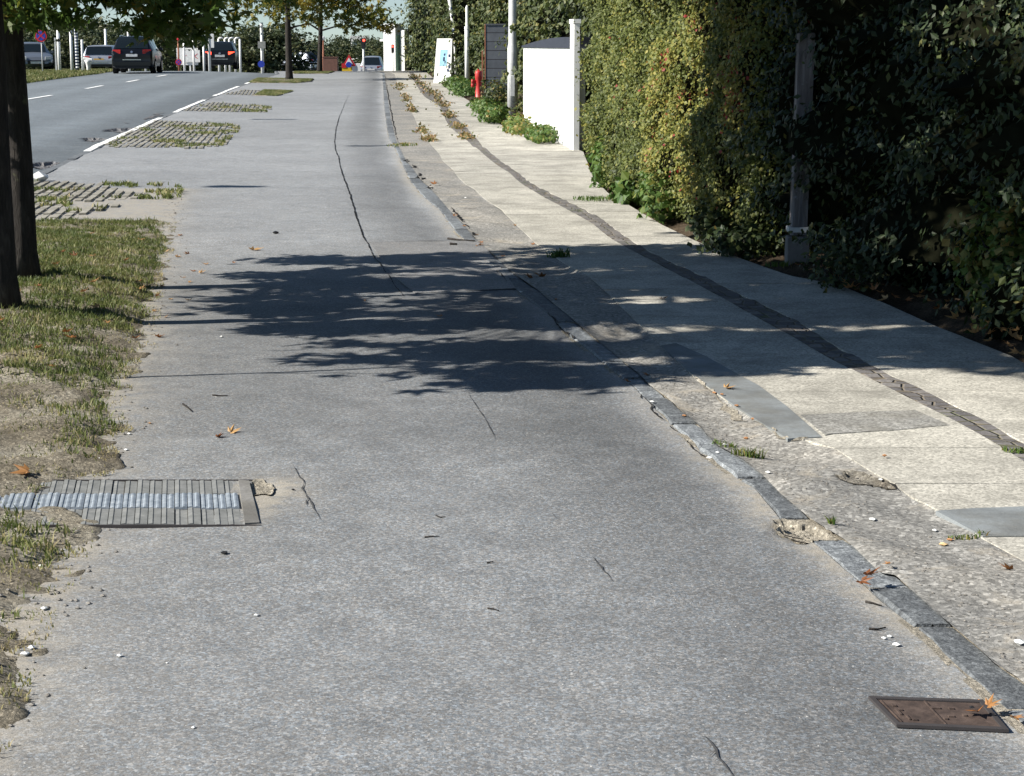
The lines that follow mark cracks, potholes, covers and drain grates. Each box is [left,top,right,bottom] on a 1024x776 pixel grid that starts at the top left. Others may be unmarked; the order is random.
manhole cover [868,696,1009,733]
pothole [773,519,838,544]
crack [294,467,320,518]
crack [704,735,733,776]
pothole [835,470,896,490]
crack [334,109,403,295]
drain grate [0,479,261,528]
